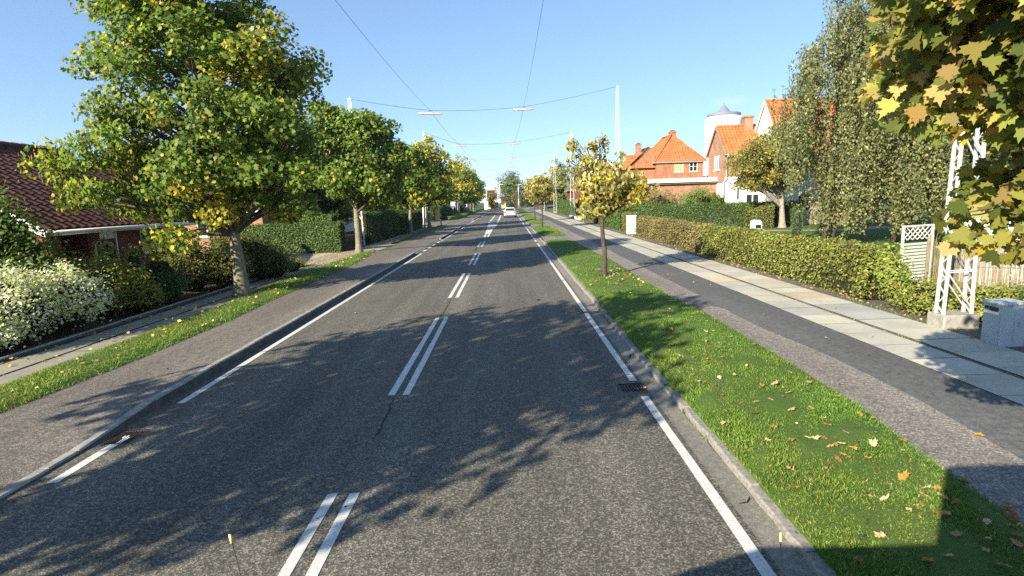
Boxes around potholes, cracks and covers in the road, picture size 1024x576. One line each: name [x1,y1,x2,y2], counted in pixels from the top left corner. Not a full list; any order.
drain grate [618,384,646,392]
drain grate [99,429,150,445]
